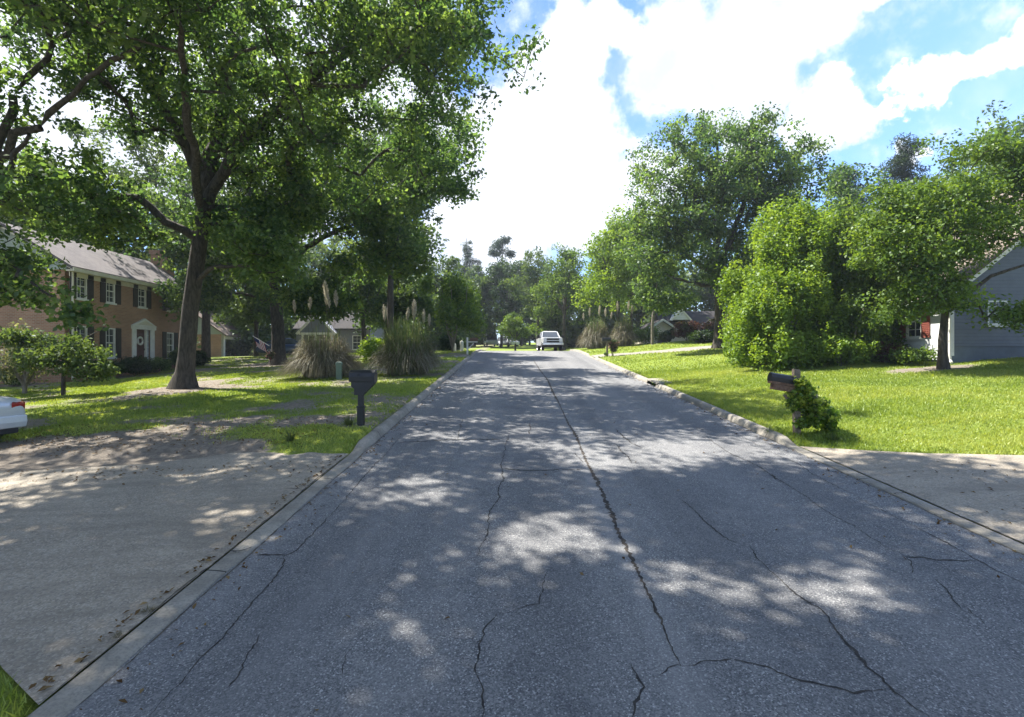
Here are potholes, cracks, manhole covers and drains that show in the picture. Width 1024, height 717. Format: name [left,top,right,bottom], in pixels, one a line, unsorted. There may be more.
crack [150,419,583,715]
crack [631,499,930,717]
